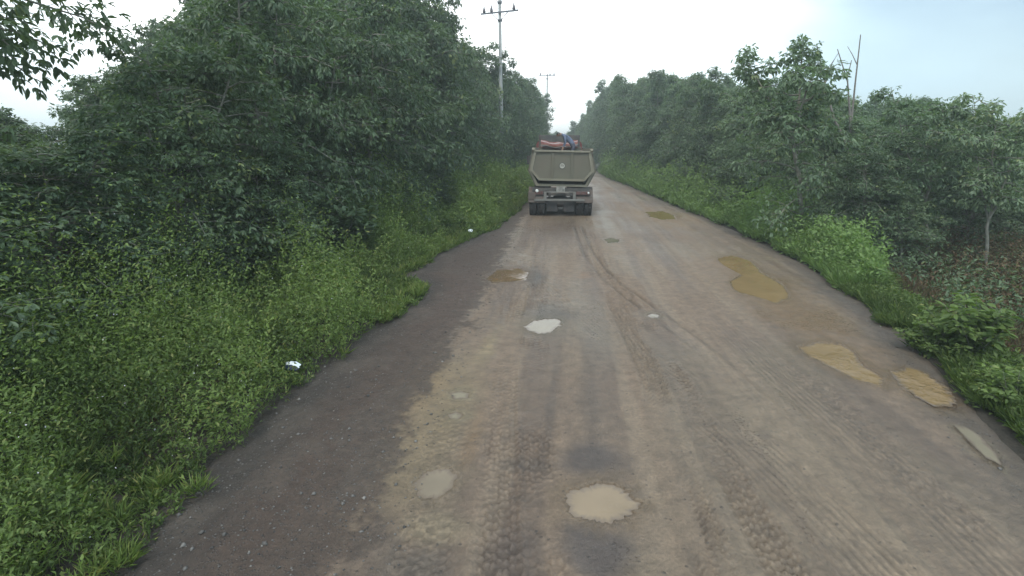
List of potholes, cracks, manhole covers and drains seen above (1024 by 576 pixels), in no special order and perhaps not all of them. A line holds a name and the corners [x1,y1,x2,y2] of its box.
pothole [556,477,651,530]
pothole [442,409,469,422]
pothole [481,267,533,284]
pothole [716,255,794,305]
pothole [405,463,464,505]
pothole [643,210,679,221]
pothole [444,388,475,402]
pothole [520,317,566,335]
pothole [950,424,1005,472]
